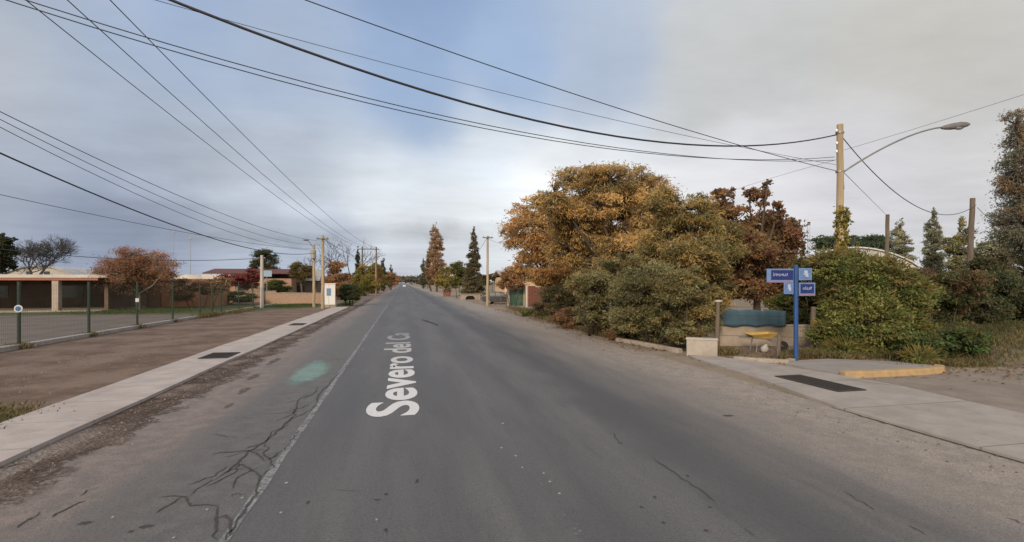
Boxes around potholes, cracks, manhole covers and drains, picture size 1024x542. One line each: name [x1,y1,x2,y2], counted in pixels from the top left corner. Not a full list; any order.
drain grate [775,374,866,392]
crack [156,359,341,540]
crack [17,488,96,528]
